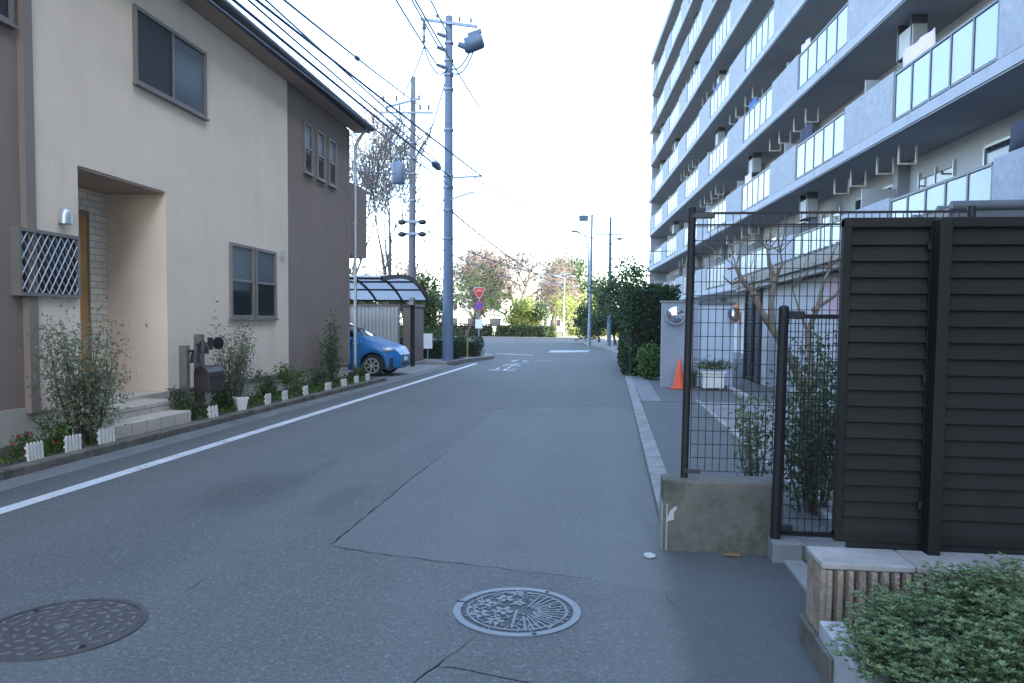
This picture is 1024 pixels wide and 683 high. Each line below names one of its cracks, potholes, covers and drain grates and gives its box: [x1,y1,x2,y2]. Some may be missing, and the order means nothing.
manhole cover [0,598,148,662]
crack [331,454,595,581]
manhole cover [453,587,581,638]
crack [413,637,530,683]
